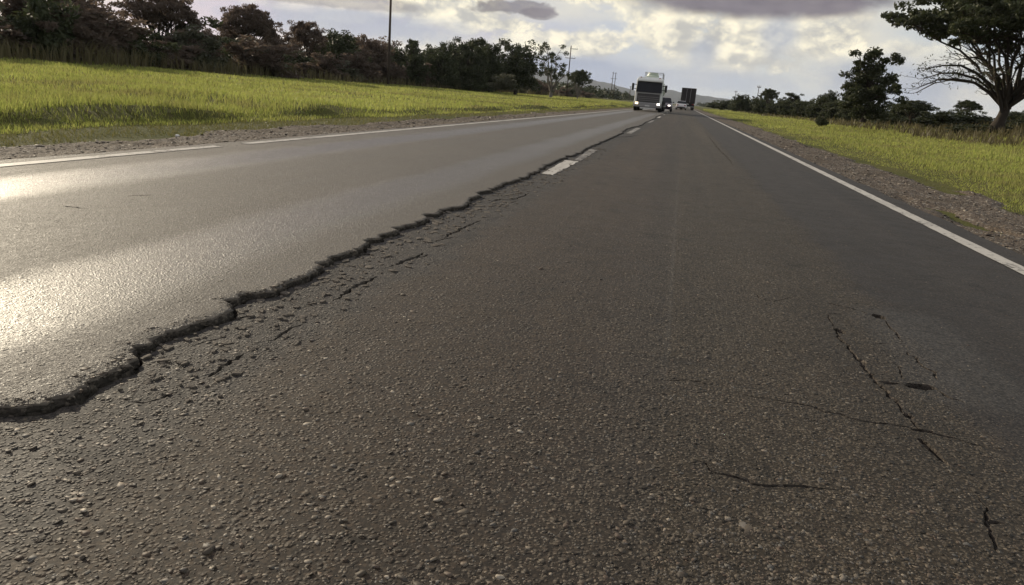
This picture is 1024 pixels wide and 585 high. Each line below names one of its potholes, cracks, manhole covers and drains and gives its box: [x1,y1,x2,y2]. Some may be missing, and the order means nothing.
crack [694,459,836,490]
crack [0,125,643,417]
crack [736,303,1003,452]
crack [979,499,1006,554]
